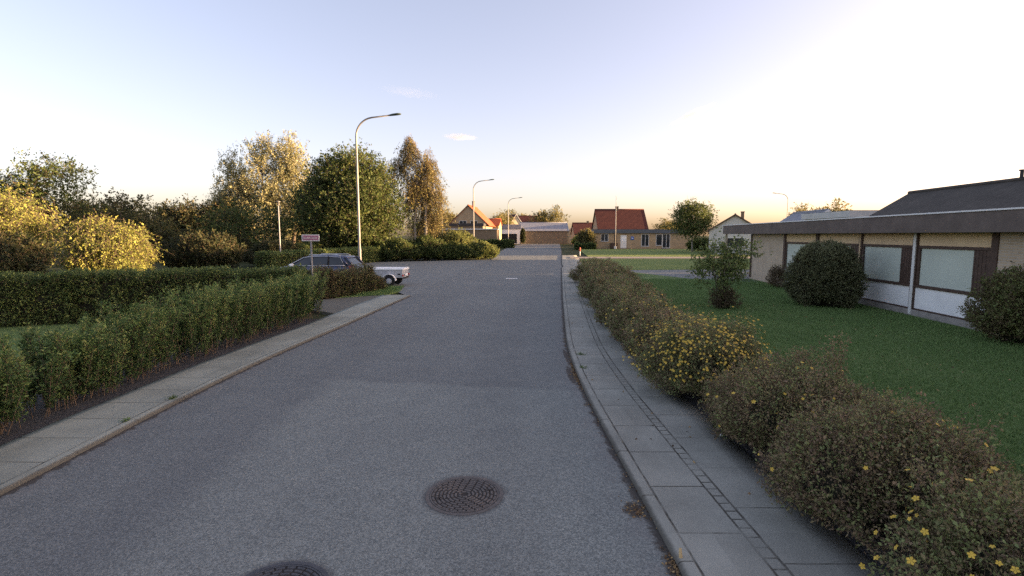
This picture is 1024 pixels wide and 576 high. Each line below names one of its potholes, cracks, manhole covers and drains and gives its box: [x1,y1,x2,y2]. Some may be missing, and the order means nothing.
manhole cover [425,476,503,516]
manhole cover [245,561,329,576]
